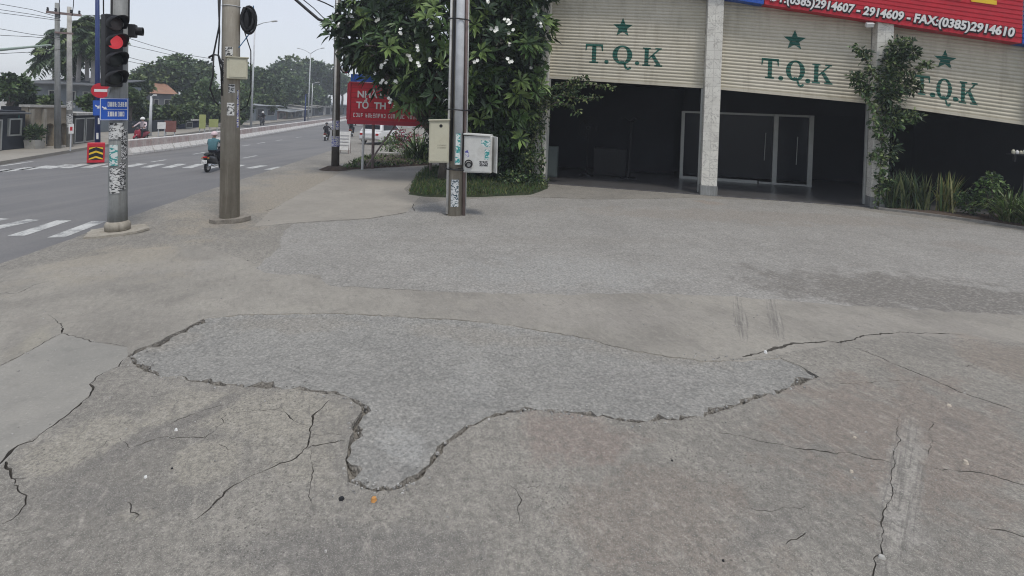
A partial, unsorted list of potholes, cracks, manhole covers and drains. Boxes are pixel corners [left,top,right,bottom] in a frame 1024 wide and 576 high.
crack [195,401,342,520]
crack [0,315,123,524]
crack [719,432,891,463]
crack [935,468,1023,485]
crack [742,332,1022,413]
crack [78,405,228,463]
